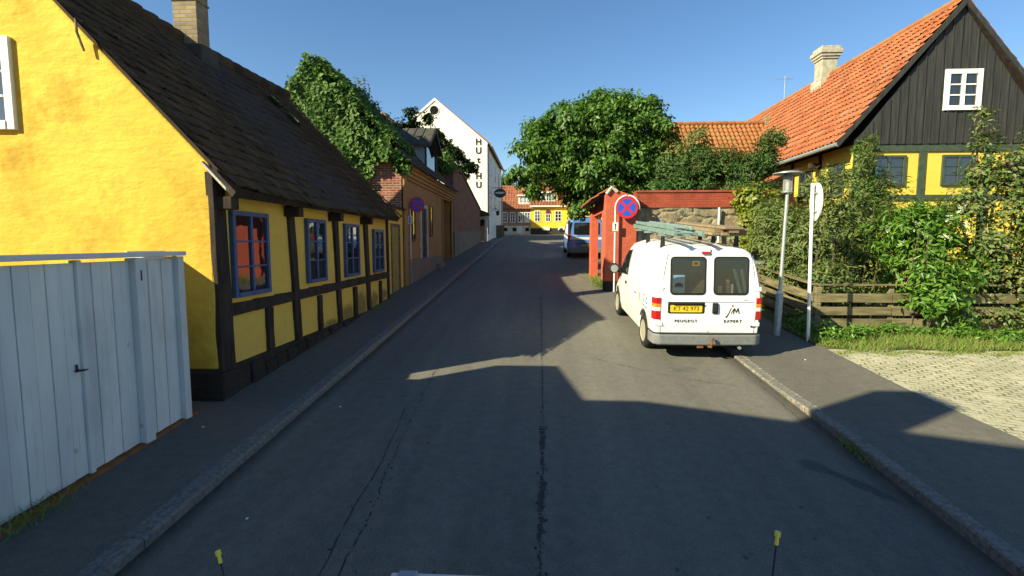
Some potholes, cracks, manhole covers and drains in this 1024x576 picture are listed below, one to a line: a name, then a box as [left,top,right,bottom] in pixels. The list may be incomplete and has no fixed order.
crack [319,371,436,576]
